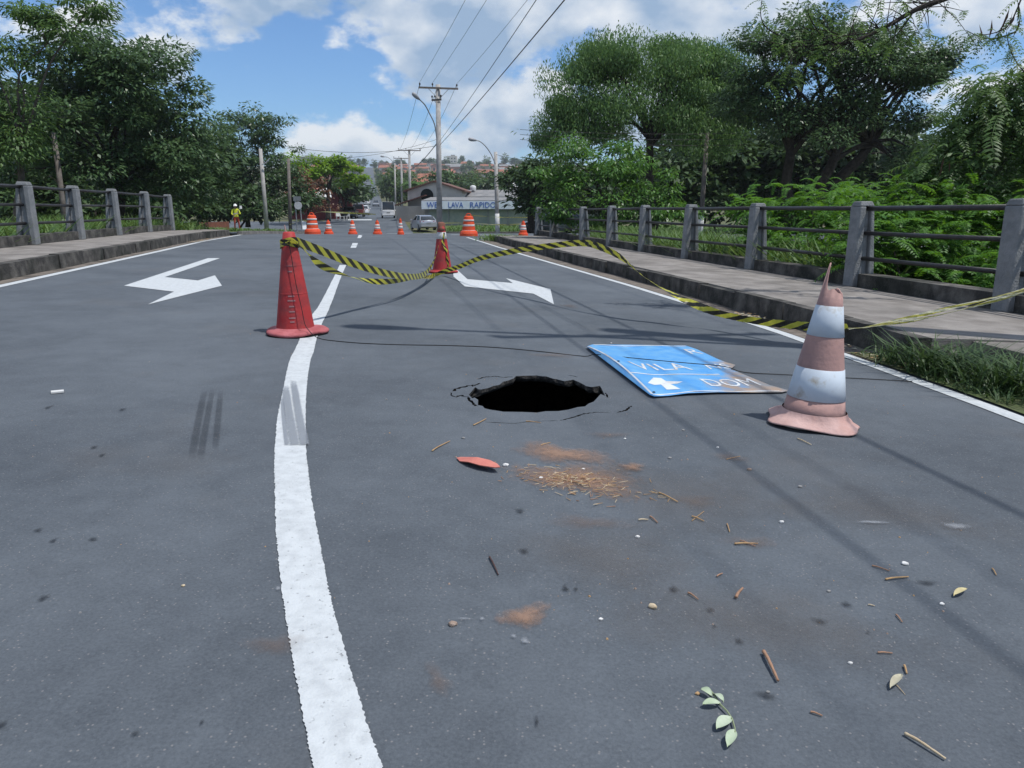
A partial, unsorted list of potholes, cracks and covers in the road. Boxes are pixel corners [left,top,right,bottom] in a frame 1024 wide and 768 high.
crack [451,376,536,423]
pothole [453,375,632,423]
